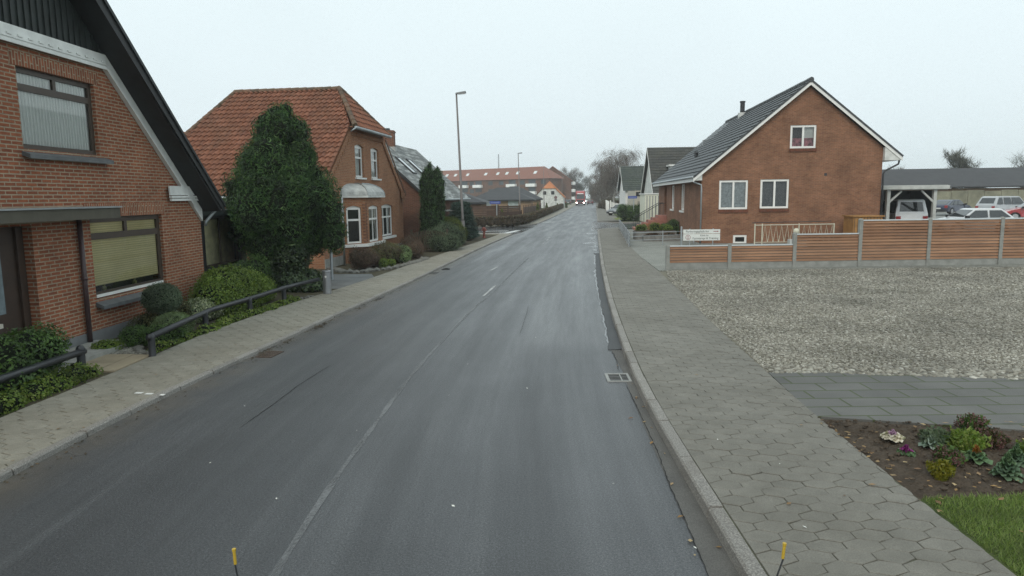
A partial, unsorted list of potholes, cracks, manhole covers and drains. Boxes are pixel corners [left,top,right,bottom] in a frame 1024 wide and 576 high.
drain grate [604,373,632,382]
